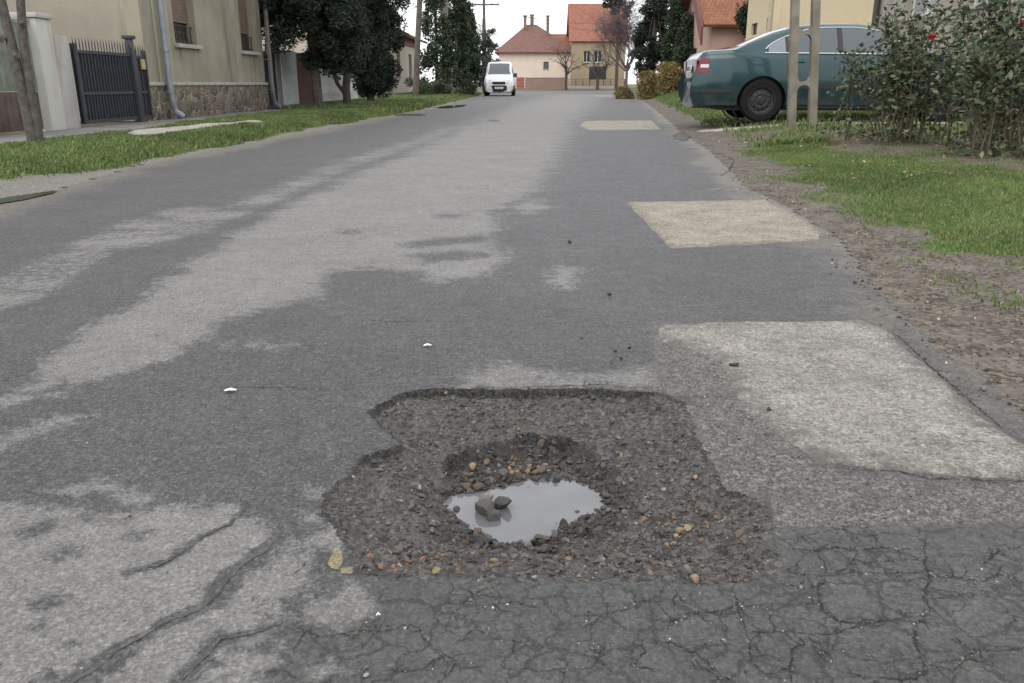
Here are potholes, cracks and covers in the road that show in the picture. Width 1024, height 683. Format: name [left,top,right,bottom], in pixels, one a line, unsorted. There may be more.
pothole [316,387,783,586]
crack [70,505,1024,683]
